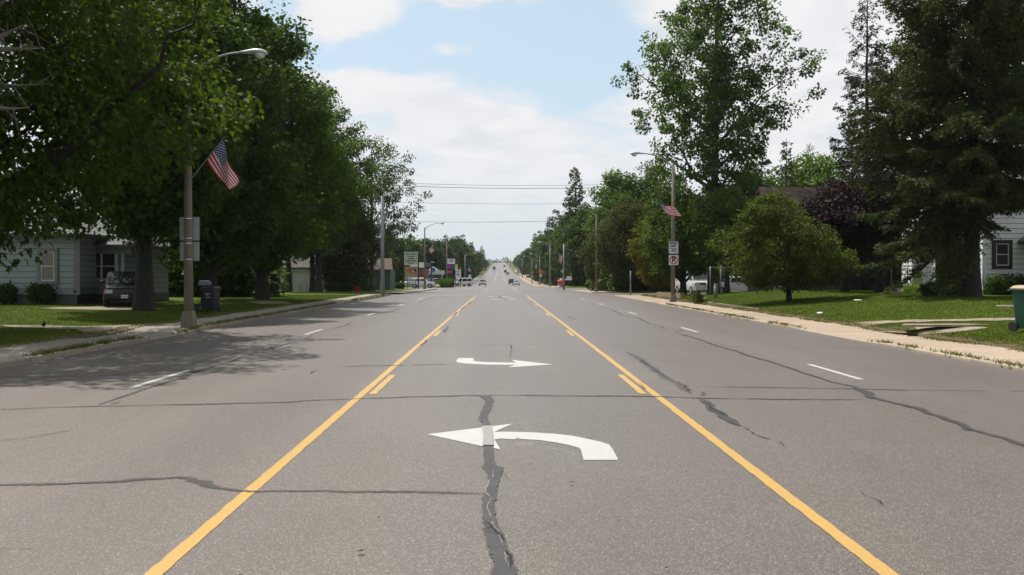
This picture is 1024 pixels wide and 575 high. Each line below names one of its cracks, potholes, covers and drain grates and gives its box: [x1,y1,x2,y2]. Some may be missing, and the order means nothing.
crack [14,359,985,445]
